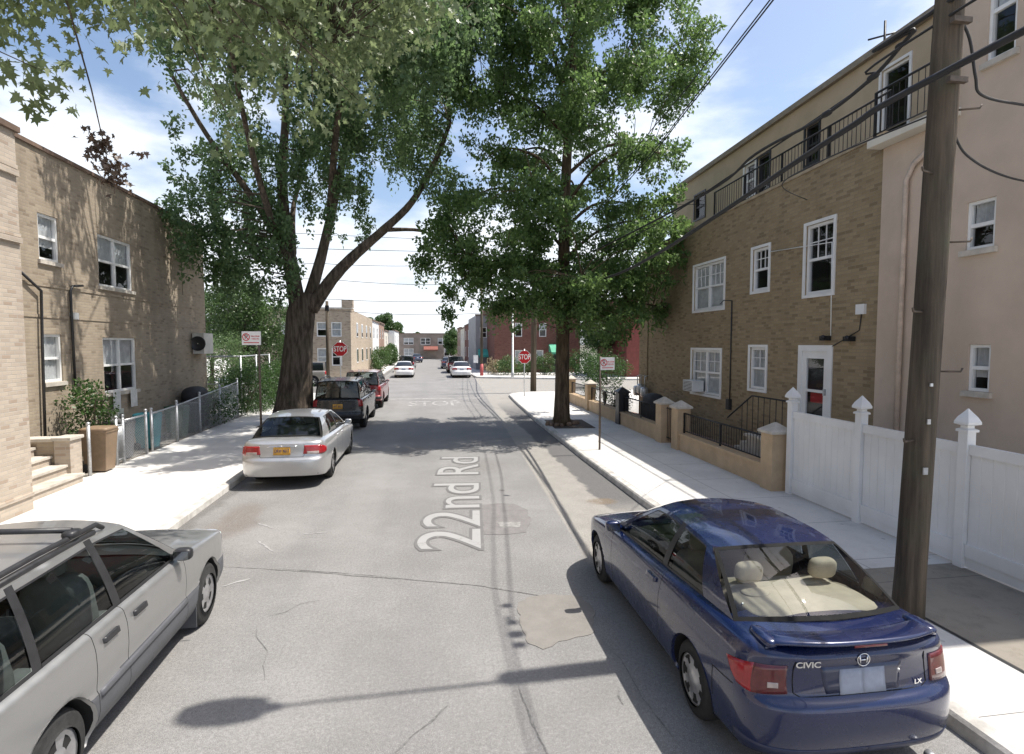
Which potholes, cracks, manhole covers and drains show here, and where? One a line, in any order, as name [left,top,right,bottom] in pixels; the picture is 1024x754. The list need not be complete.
crack [256,600,318,677]
crack [395,705,448,753]
crack [223,566,613,600]
